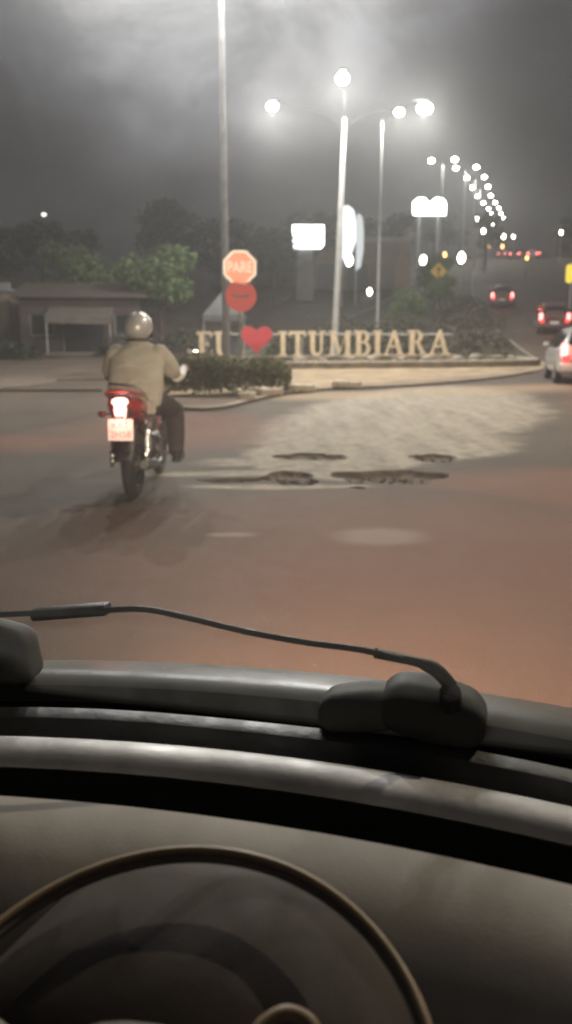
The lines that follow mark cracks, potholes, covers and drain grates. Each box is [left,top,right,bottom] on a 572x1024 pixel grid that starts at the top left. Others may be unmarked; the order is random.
pothole [407,454,457,463]
pothole [259,471,319,486]
pothole [330,470,450,485]
